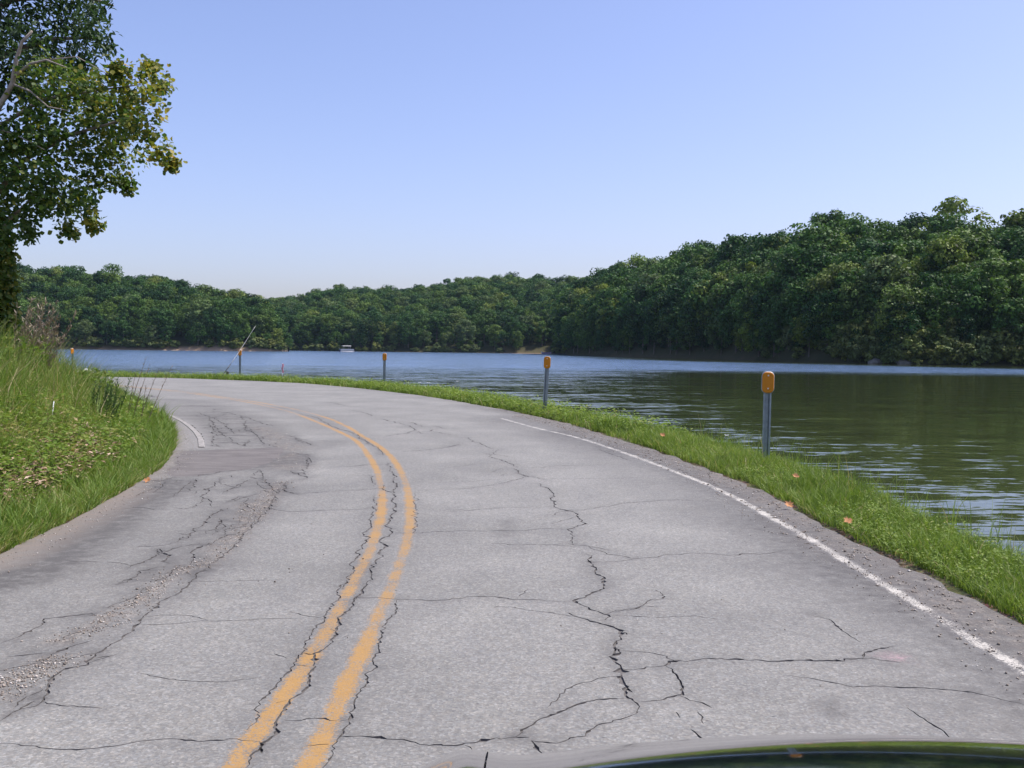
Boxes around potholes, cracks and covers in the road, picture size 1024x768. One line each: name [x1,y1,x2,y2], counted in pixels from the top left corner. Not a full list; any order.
crack [0,415,1024,768]
